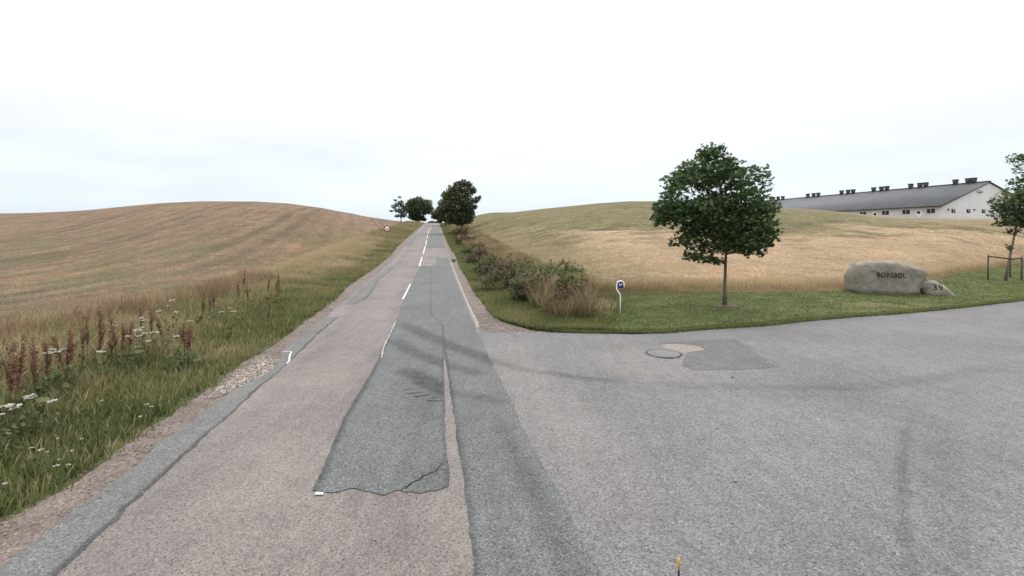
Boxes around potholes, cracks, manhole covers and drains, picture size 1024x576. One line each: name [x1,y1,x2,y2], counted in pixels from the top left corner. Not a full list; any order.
manhole cover [644,349,684,359]
